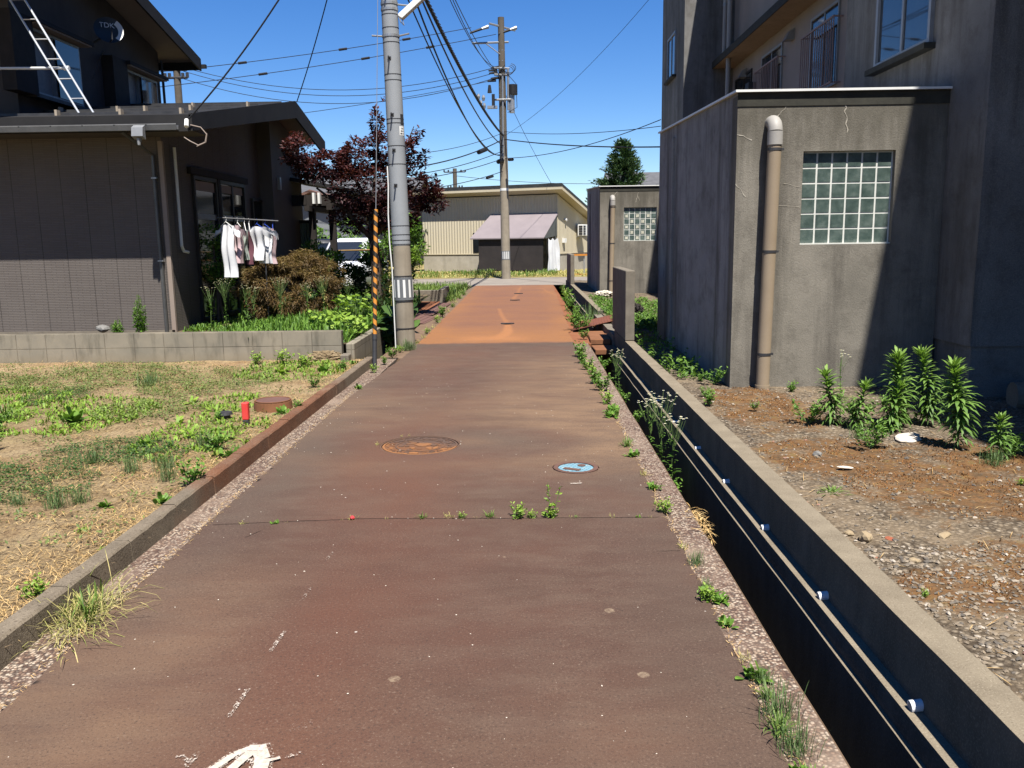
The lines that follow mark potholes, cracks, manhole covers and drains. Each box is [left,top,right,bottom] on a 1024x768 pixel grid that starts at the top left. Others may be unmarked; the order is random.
utility cover [254,396,293,413]
utility cover [553,461,599,474]
manhole cover [380,436,460,455]
